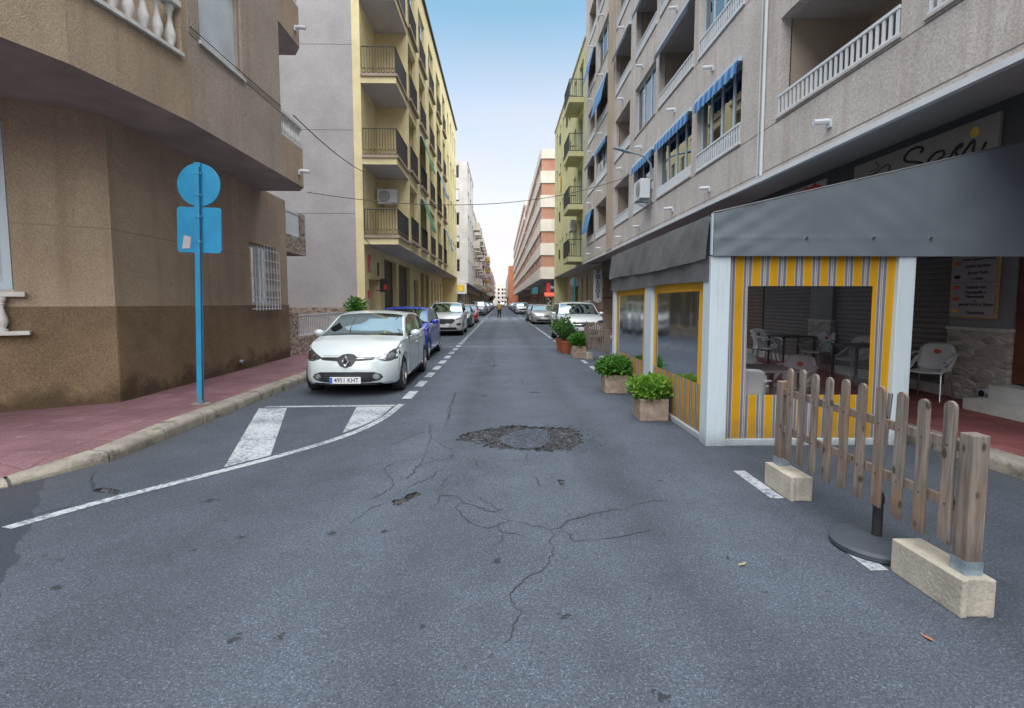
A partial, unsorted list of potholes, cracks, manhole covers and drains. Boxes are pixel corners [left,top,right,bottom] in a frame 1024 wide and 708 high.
pothole [455,424,609,454]
pothole [392,492,422,506]
crack [347,393,693,643]
